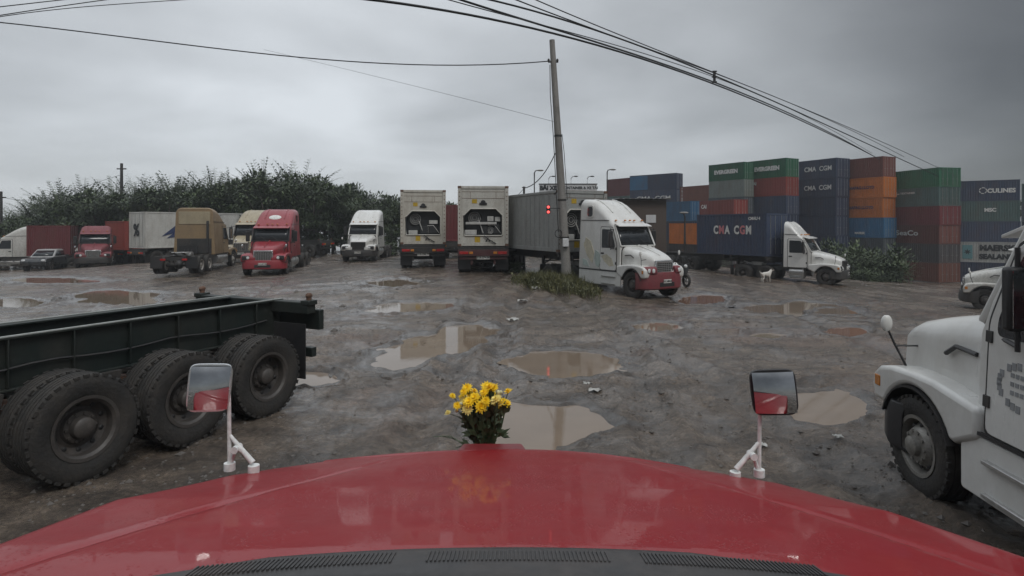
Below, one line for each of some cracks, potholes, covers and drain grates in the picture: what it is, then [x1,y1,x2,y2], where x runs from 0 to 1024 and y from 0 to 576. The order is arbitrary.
pothole [351,276,437,290]
pothole [0,275,128,285]
pothole [328,318,519,380]
pothole [335,298,473,318]
pothole [725,298,897,317]
pothole [812,323,878,339]
pothole [456,393,646,451]
pothole [484,344,646,384]
pothole [764,384,885,433]
pothole [668,292,737,307]
pothole [617,318,696,334]
pothole [0,296,51,309]
